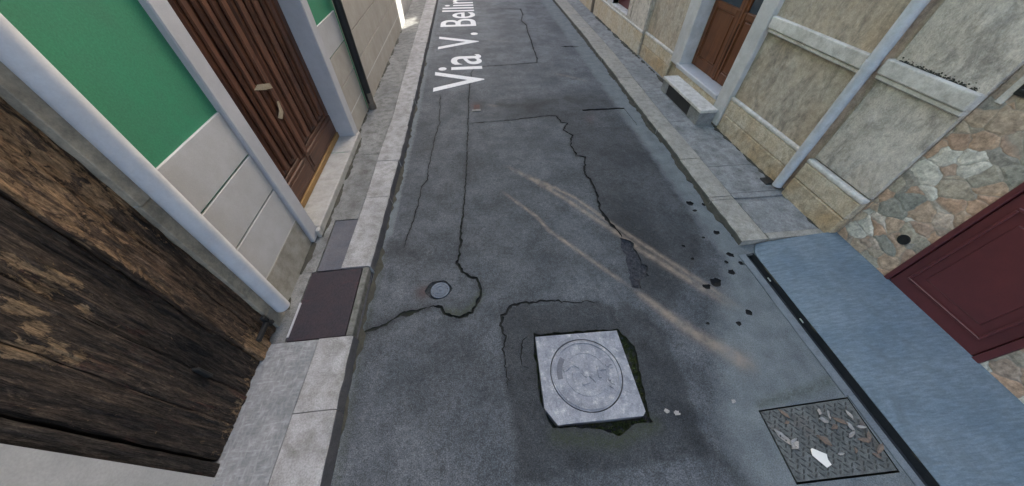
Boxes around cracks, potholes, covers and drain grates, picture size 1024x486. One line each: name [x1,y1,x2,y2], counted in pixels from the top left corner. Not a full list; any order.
utility cover [425,280,452,300]
crack [365,9,622,332]
crack [499,300,595,391]
pothole [620,238,649,289]
manhole cover [535,330,645,427]
